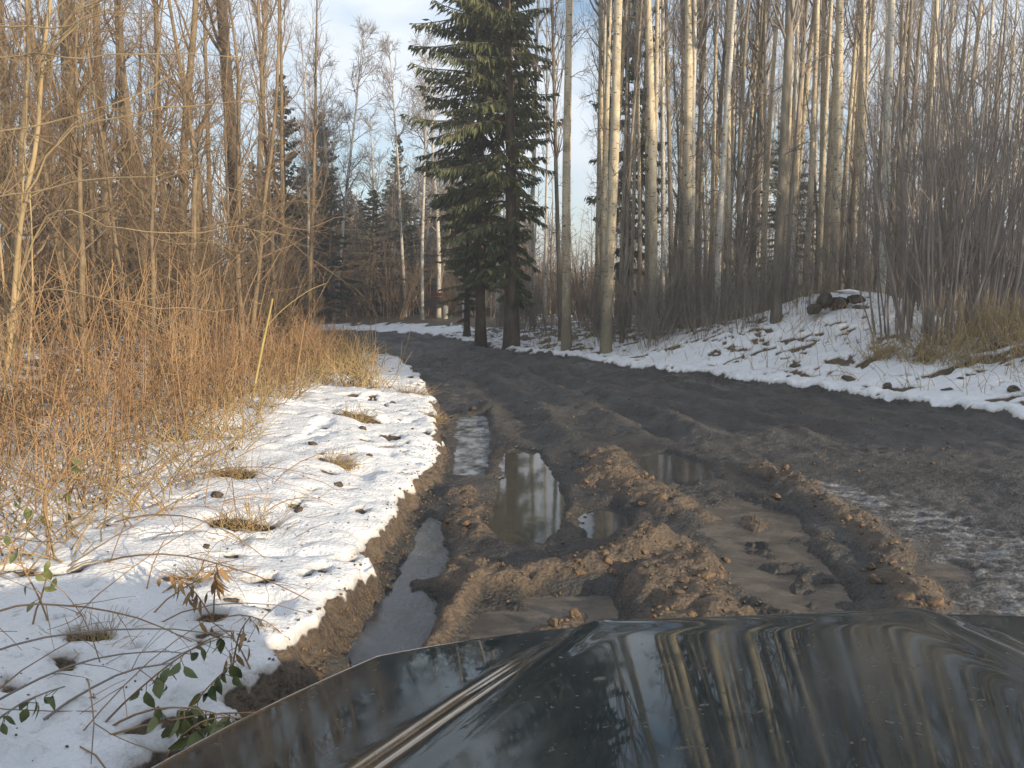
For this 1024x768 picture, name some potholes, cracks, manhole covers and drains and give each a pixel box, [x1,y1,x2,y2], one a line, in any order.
pothole [571,492,647,539]
pothole [632,445,729,487]
pothole [485,443,587,544]
